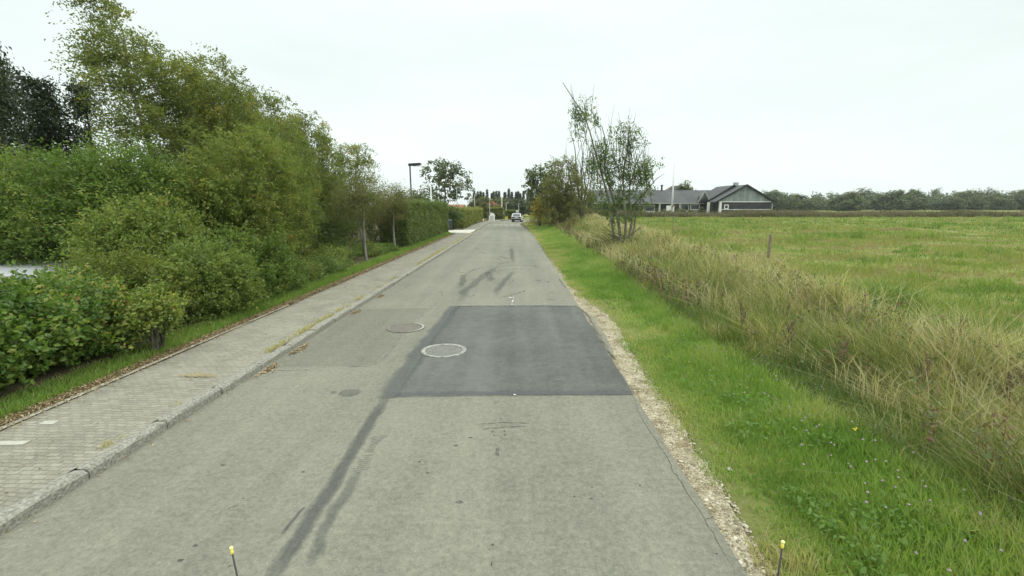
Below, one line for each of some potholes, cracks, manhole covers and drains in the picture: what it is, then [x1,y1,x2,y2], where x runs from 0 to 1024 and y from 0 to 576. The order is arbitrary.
manhole cover [421,344,466,358]
manhole cover [387,323,425,333]
